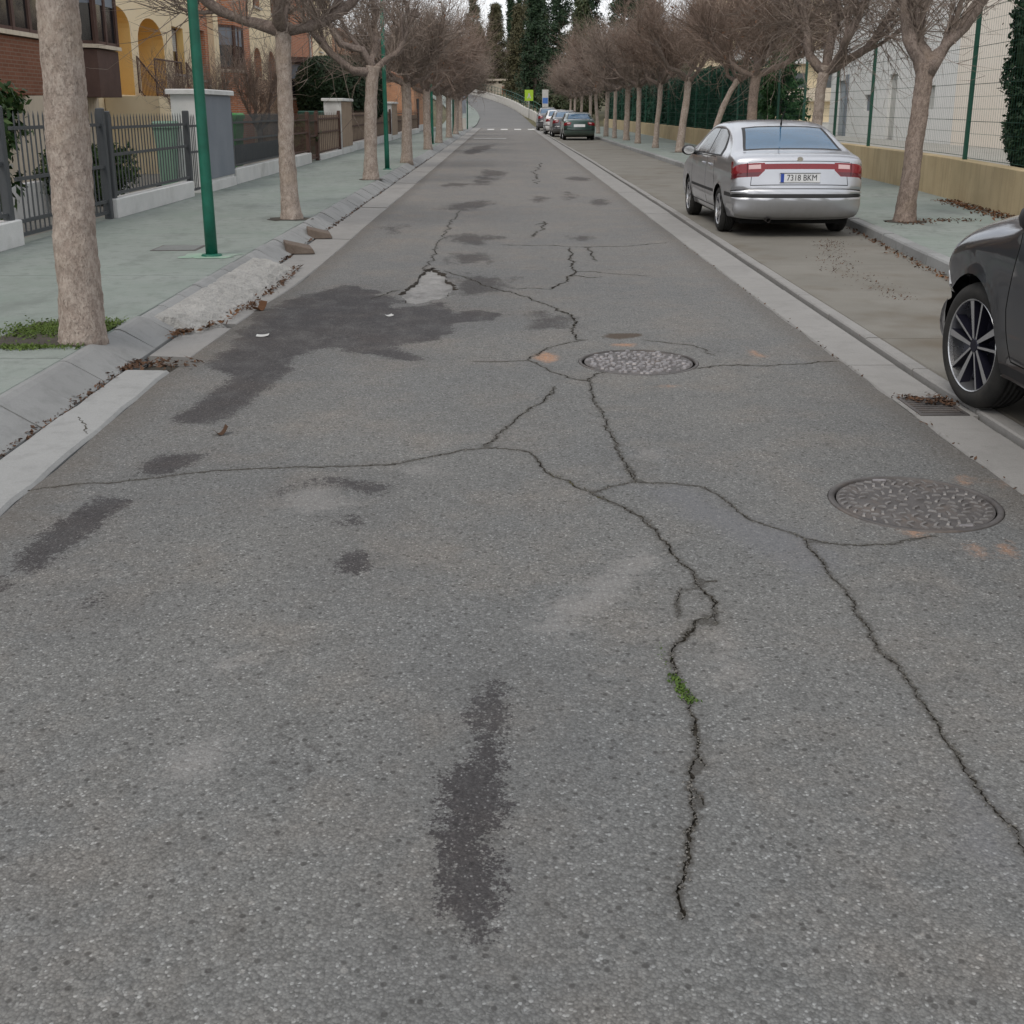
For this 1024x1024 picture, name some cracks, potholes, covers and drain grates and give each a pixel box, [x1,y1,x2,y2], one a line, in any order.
crack [476,340,832,381]
drain grate [891,397,978,419]
crack [371,212,658,340]
manhole cover [828,476,1005,533]
crack [27,381,1024,920]
pothole [398,268,459,304]
manhole cover [579,349,699,376]
